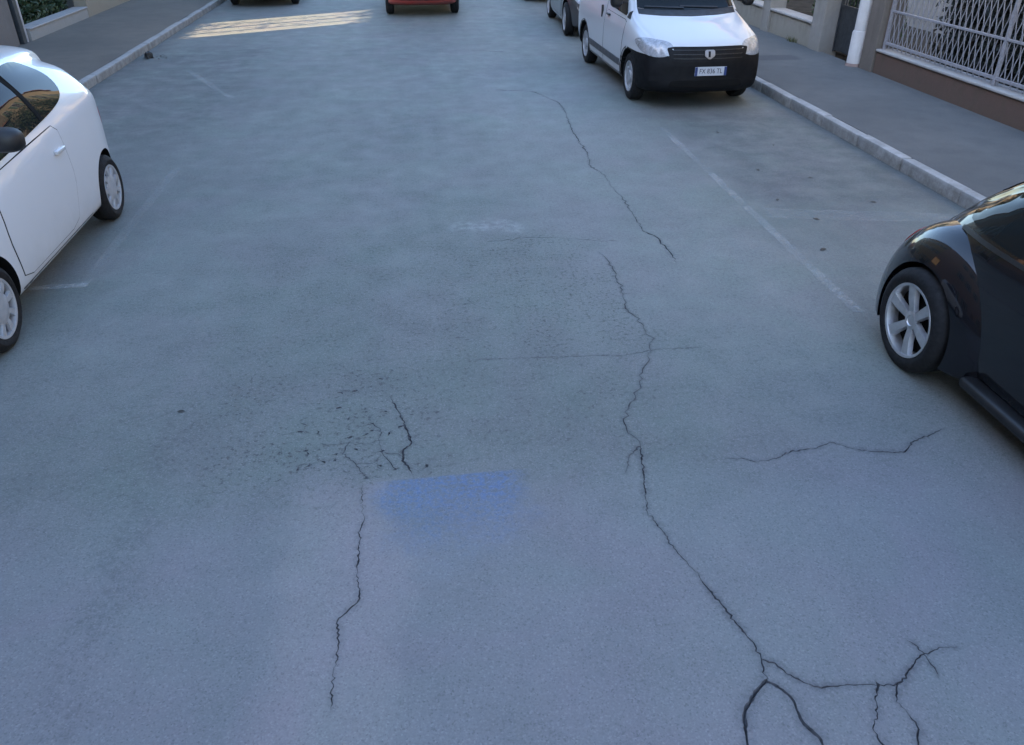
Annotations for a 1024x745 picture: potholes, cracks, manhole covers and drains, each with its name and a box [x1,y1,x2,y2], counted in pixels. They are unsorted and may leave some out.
crack [531,91,673,257]
crack [479,347,699,360]
crack [296,378,428,706]
crack [605,257,957,745]
